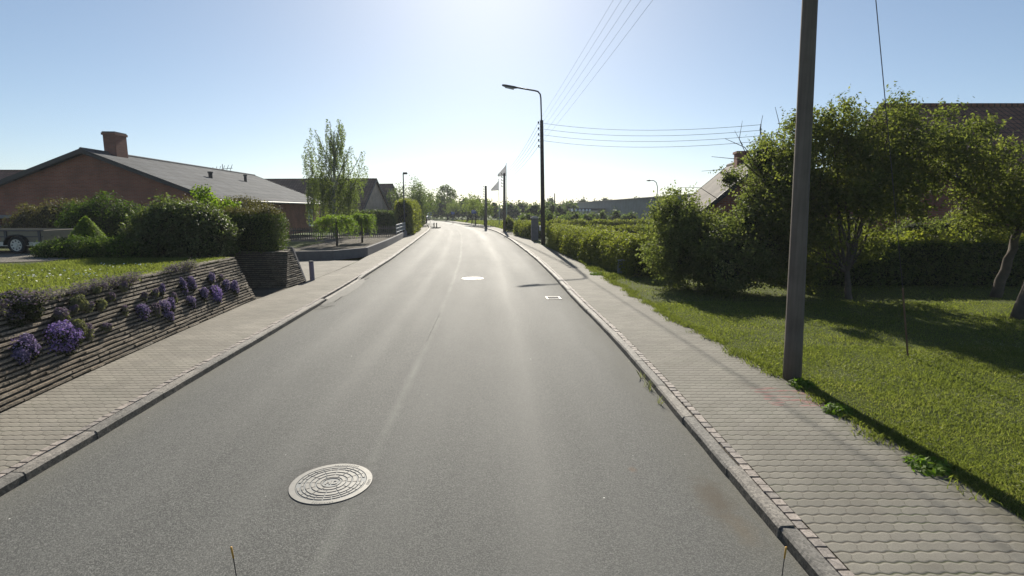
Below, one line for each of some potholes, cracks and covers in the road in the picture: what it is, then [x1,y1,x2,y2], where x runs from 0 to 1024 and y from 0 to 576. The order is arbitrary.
manhole cover [288,464,373,505]
